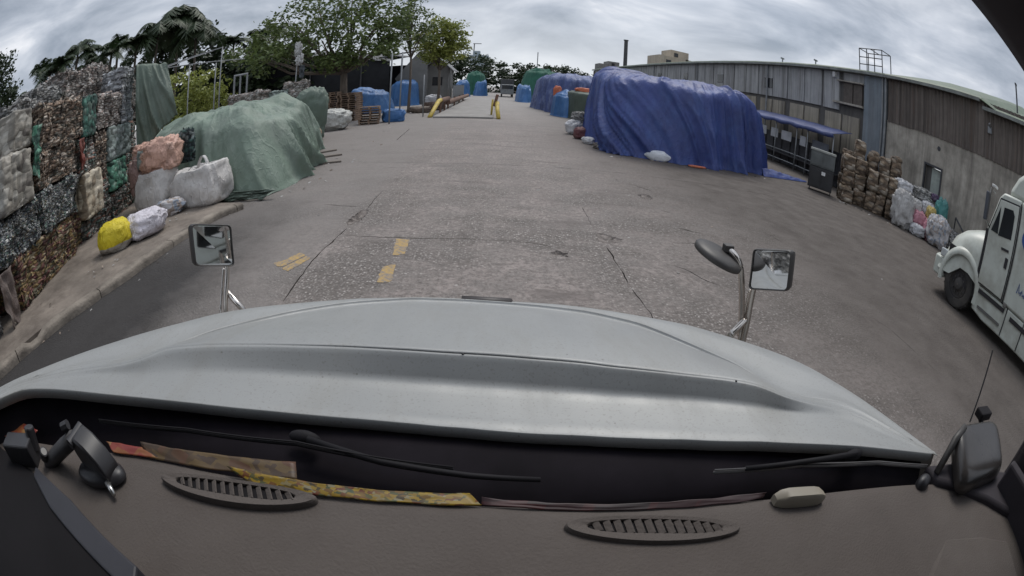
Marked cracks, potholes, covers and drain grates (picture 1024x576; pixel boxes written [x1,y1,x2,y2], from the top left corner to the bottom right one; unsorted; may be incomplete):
crack [284,229,346,300]
crack [607,248,653,318]
pothole [346,210,369,226]
